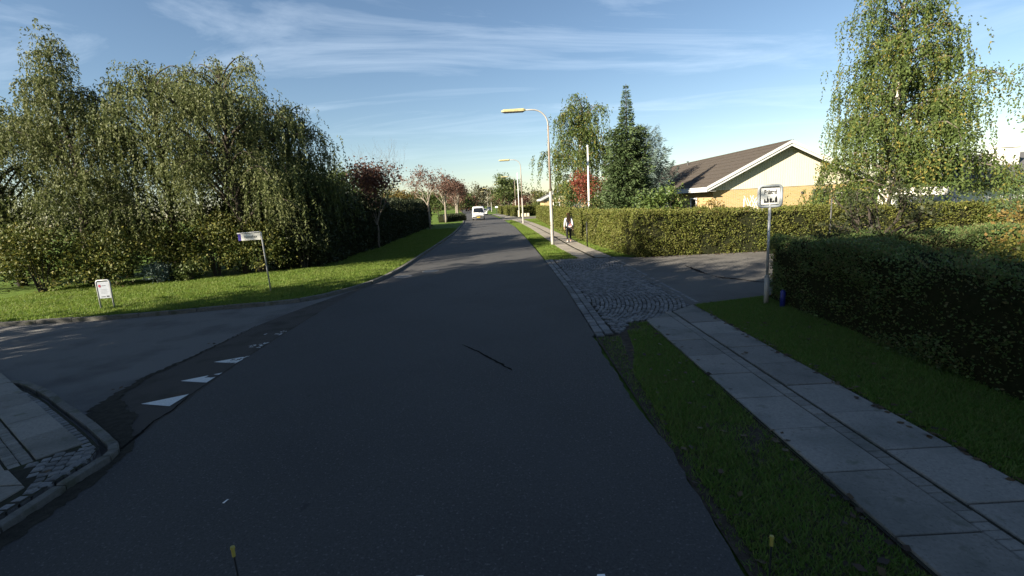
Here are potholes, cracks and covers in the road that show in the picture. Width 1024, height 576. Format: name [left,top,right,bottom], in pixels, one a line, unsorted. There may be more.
crack [685,265,760,282]
crack [462,344,512,370]
